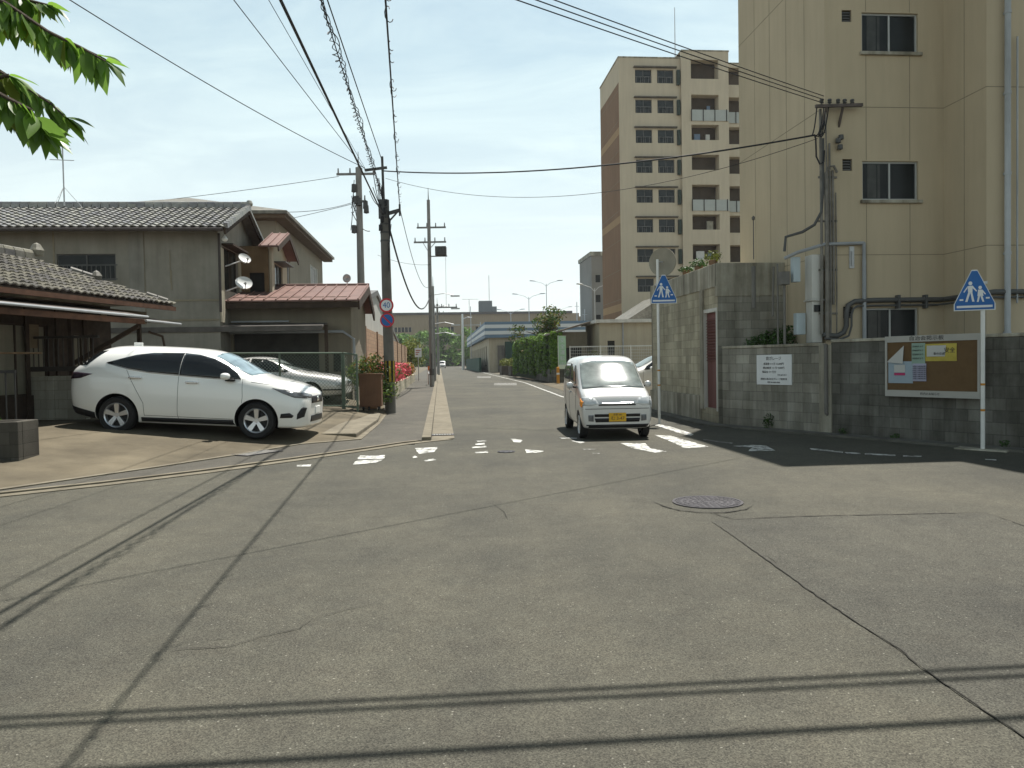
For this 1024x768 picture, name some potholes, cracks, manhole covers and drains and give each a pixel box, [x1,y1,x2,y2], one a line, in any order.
manhole cover [672,495,744,509]
crack [173,604,370,650]
crack [653,501,1024,526]
